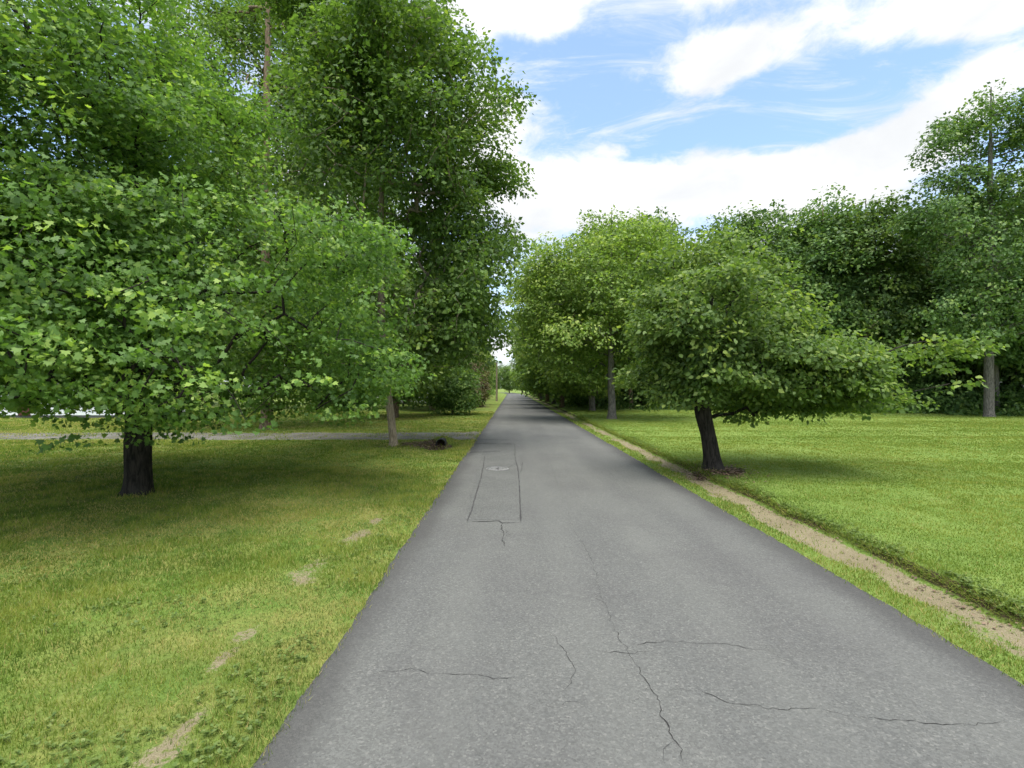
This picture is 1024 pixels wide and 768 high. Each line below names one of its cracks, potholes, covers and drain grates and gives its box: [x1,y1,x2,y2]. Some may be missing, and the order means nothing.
crack [686,690,1001,725]
crack [554,473,802,761]
